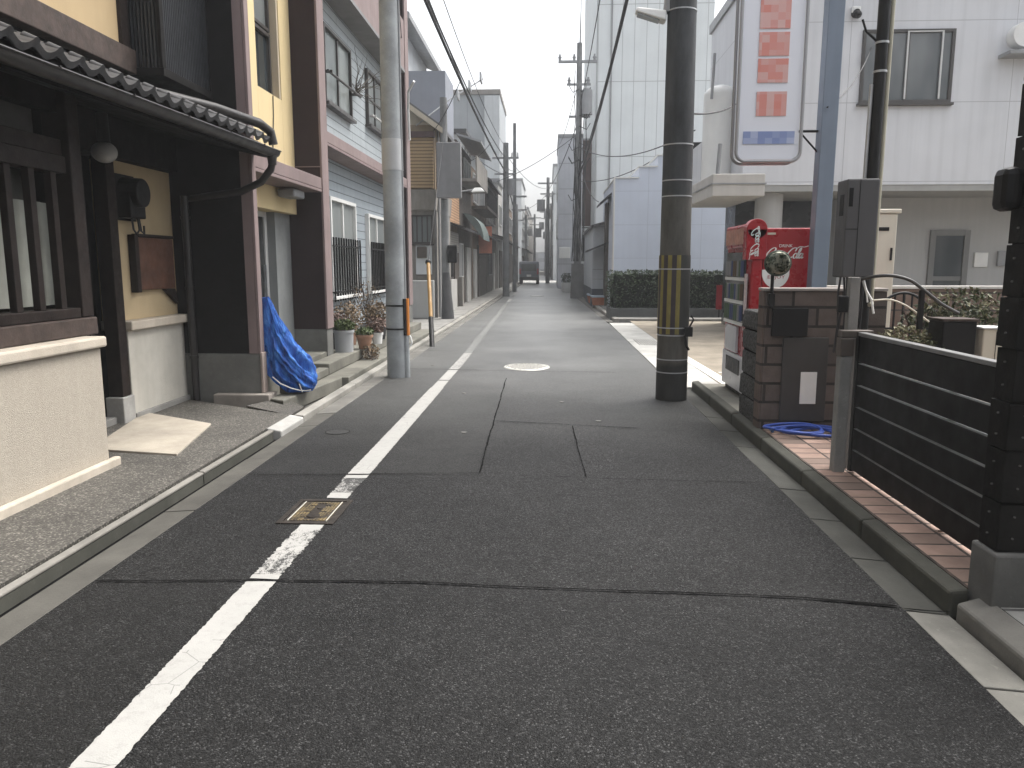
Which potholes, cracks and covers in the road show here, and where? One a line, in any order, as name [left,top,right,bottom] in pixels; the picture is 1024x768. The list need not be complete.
manhole cover [275,499,353,525]
manhole cover [504,363,550,371]
crack [248,368,738,482]
